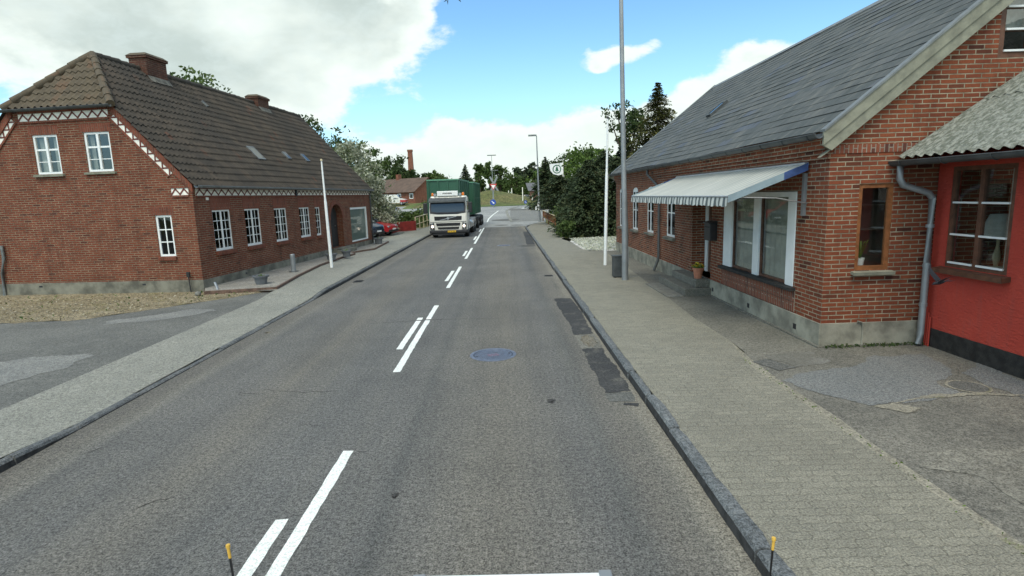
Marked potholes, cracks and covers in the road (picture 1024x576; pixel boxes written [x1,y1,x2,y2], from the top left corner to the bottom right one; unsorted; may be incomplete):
manhole cover [470,348,516,361]
